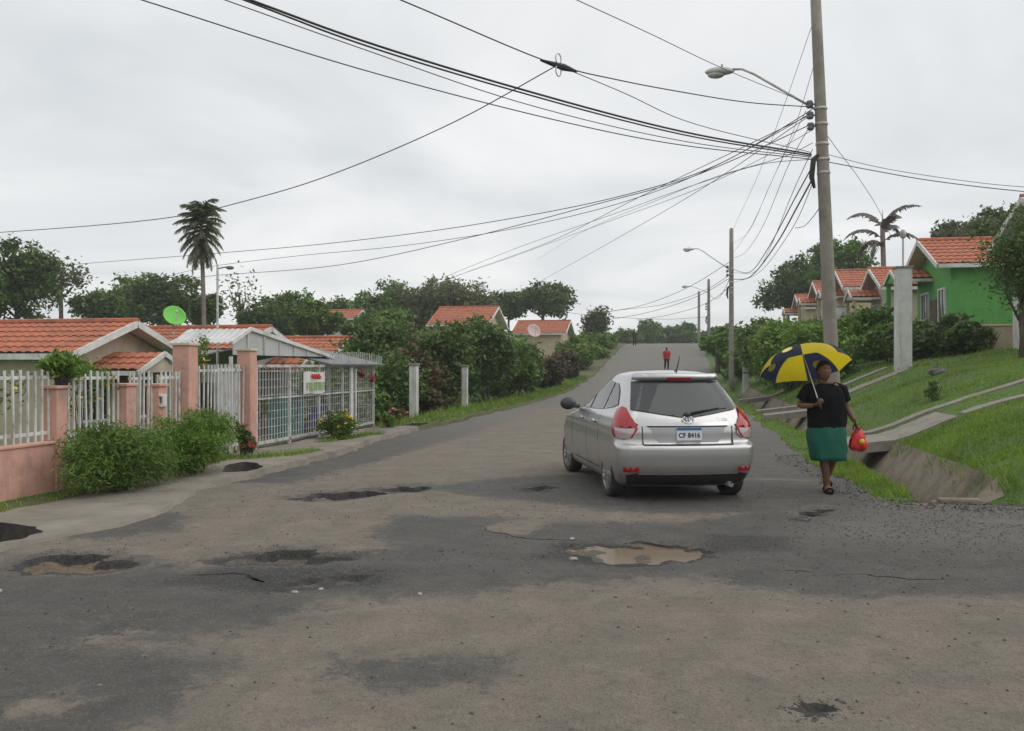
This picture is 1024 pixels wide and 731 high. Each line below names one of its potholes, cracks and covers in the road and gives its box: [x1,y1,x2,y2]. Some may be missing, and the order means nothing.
pothole [287,491,387,502]
pothole [793,702,841,718]
crack [181,572,263,580]
pothole [212,549,358,567]
crack [779,570,945,580]
pothole [7,554,142,576]
pothole [560,541,716,568]
